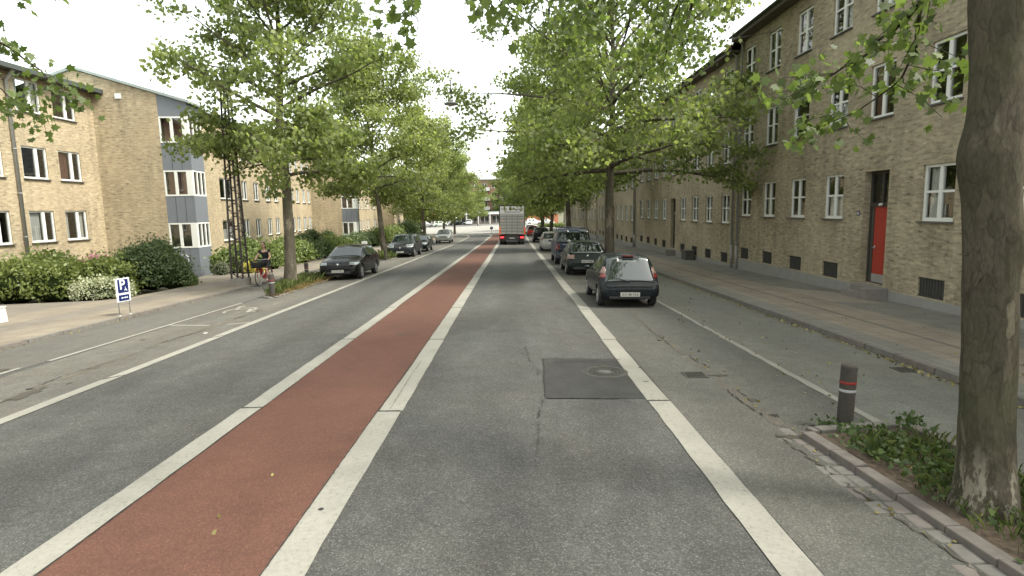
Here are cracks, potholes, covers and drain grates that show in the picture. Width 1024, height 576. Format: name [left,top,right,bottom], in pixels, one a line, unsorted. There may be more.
manhole cover [582,366,628,378]
